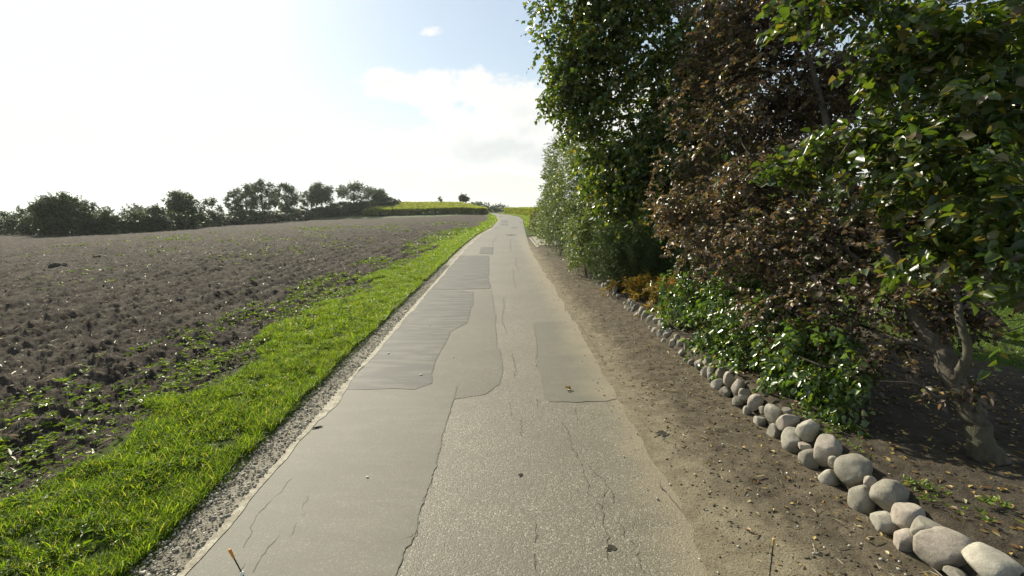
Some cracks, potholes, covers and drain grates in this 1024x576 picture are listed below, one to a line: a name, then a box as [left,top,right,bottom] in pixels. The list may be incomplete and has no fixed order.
crack [562,409,644,573]
crack [242,482,308,572]
